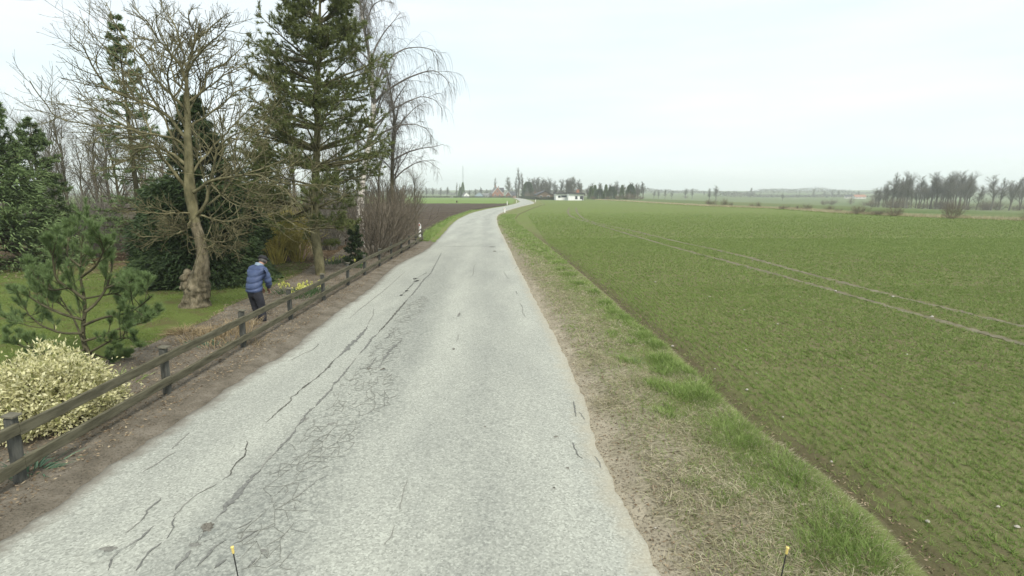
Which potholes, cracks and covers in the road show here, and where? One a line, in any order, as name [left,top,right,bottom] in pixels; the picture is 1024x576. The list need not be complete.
crack [108,254,441,570]
